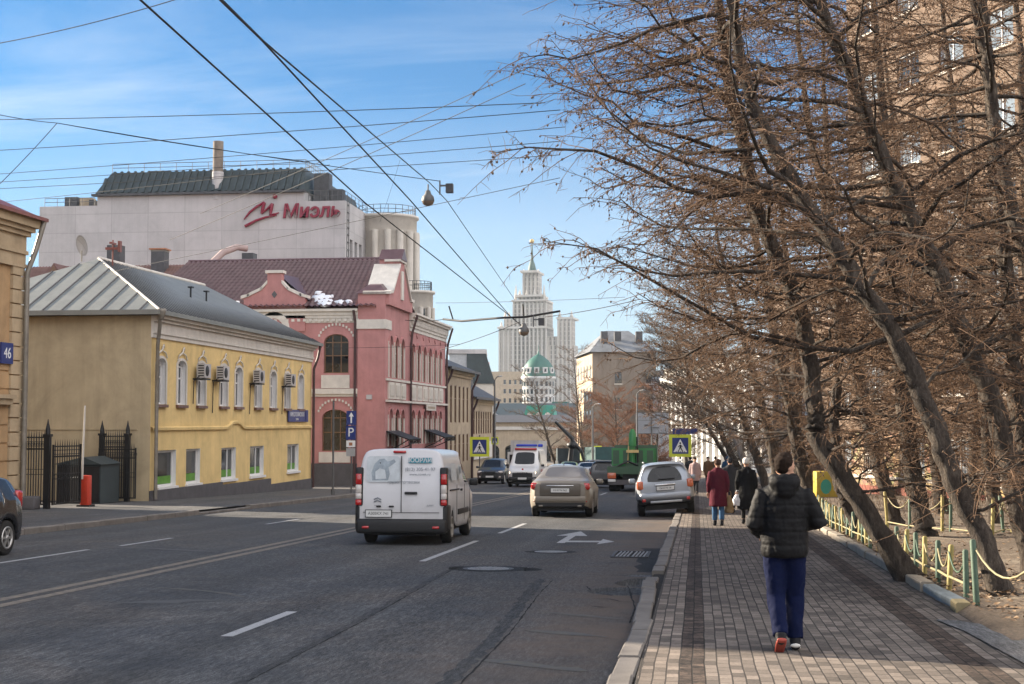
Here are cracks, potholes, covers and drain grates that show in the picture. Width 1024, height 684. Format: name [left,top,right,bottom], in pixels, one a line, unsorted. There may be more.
crack [586,586,636,623]
